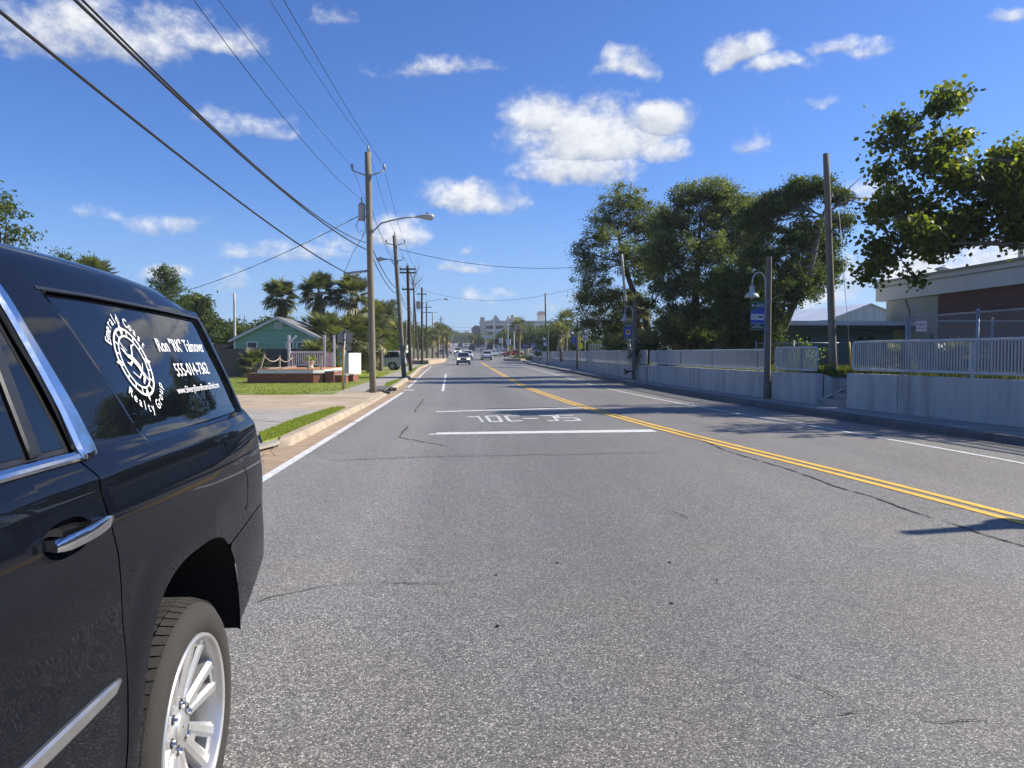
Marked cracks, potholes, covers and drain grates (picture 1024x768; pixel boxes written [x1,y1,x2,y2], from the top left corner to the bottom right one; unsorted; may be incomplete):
crack [747,650,1012,723]
crack [336,399,1024,546]
crack [252,582,456,603]
